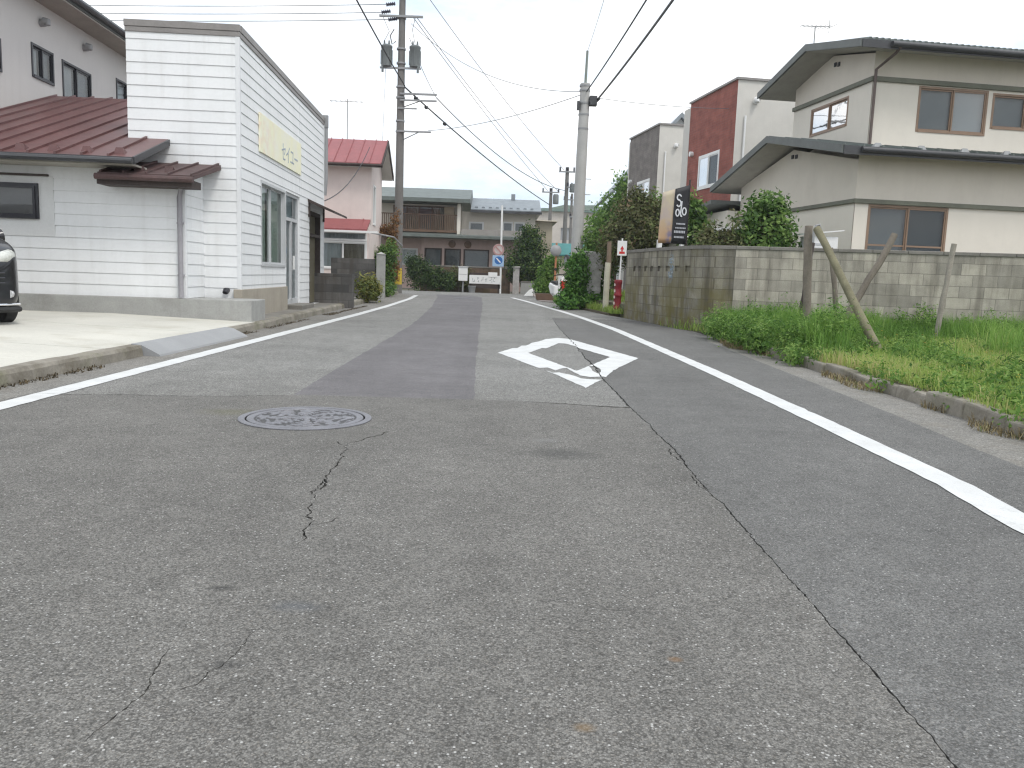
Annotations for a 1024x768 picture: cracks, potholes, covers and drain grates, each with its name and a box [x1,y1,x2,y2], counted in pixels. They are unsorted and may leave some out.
crack [525,323,958,768]
crack [297,431,389,545]
manhole cover [238,406,372,431]
crack [86,626,263,741]
